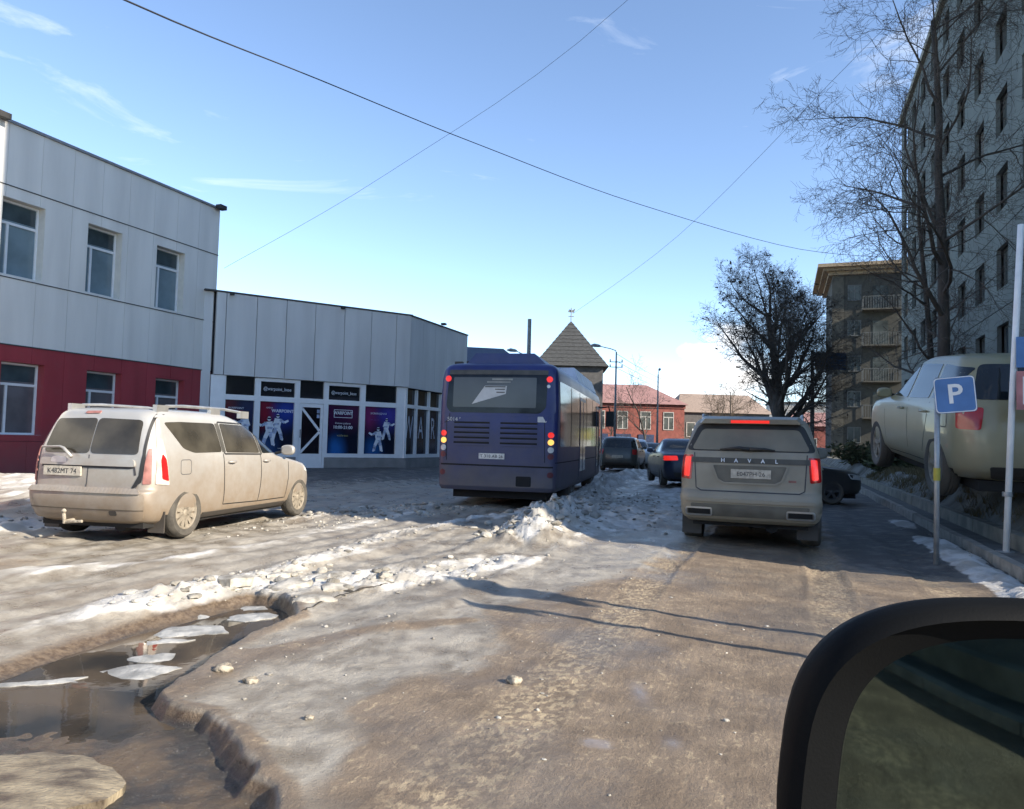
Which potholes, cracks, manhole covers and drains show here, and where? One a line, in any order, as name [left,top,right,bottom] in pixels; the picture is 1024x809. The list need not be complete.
pothole [0,588,302,809]
